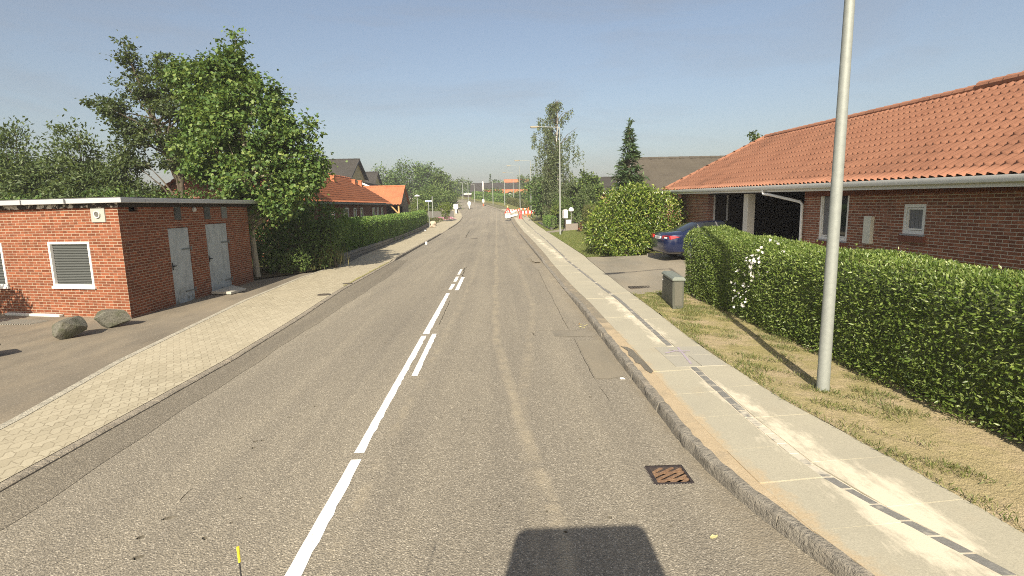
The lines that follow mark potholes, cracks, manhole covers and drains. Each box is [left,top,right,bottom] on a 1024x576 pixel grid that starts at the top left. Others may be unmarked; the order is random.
drain grate [644,465,694,485]
